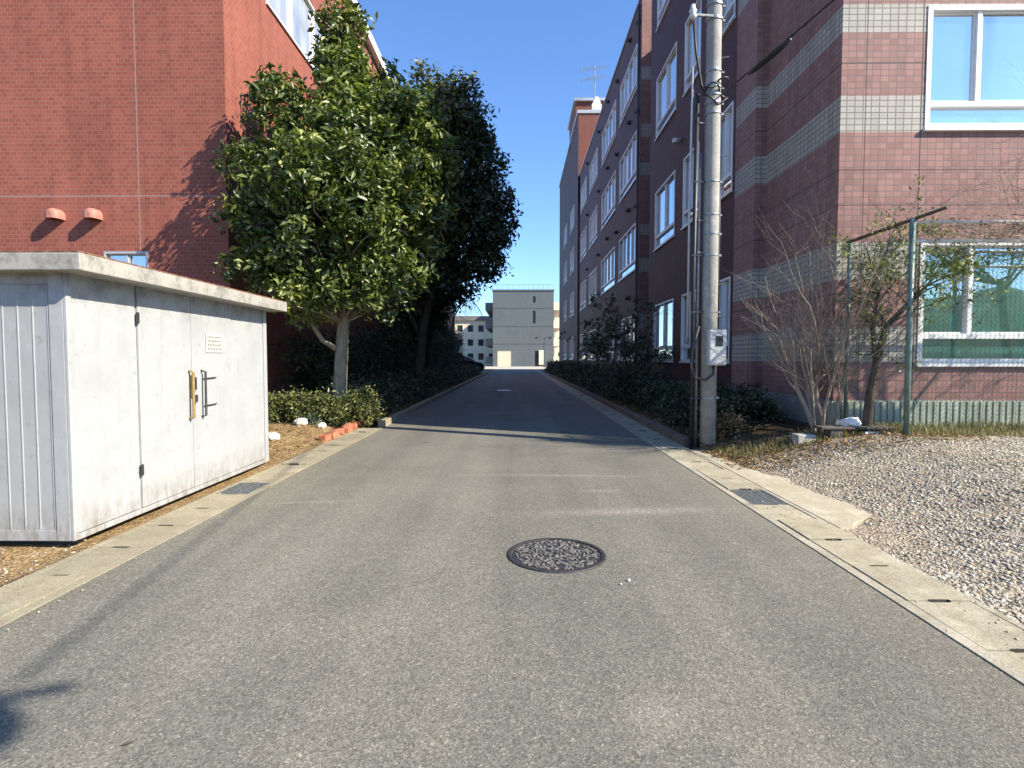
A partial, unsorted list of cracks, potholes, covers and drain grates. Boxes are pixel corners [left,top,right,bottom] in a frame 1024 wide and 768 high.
drain grate [729,490,787,505]
manhole cover [507,538,606,574]
drain grate [216,483,269,494]
